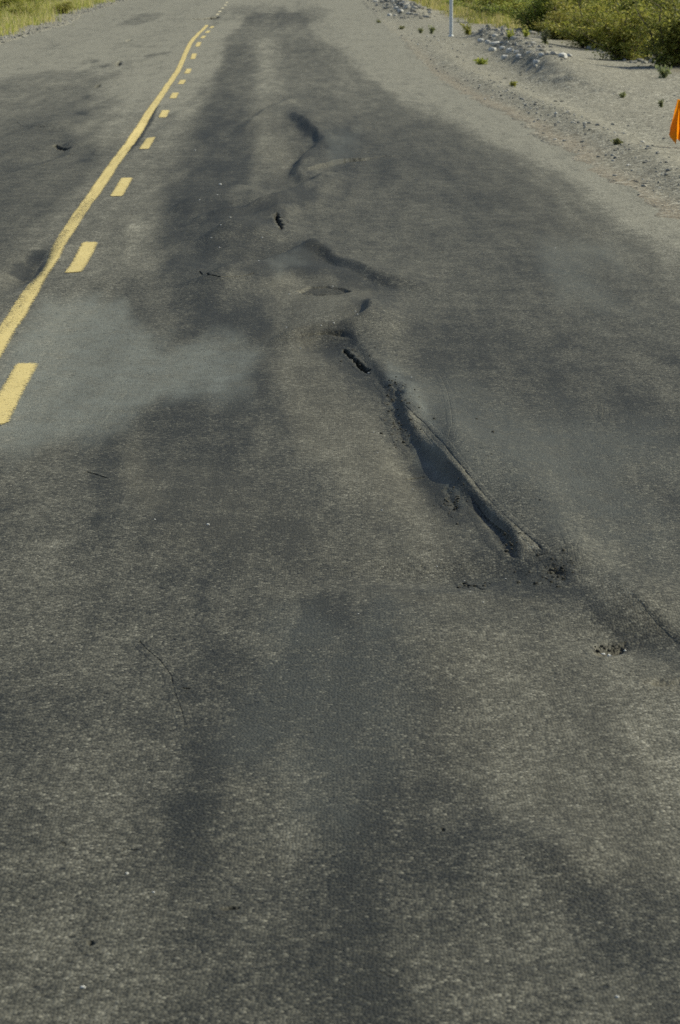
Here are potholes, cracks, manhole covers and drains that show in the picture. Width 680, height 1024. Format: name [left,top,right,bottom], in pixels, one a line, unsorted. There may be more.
pothole [268,211,287,231]
pothole [44,144,78,153]
pothole [336,346,375,376]
pothole [292,285,356,297]
pothole [373,377,412,410]
crack [80,470,114,481]
crack [195,271,258,279]
pothole [536,556,579,588]
pothole [378,405,423,457]
crack [131,638,198,727]
